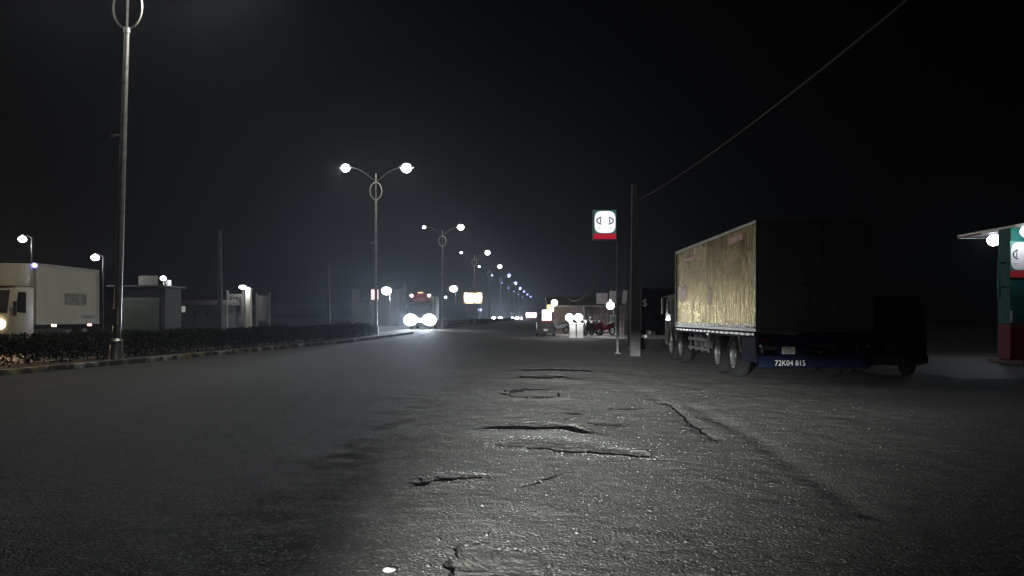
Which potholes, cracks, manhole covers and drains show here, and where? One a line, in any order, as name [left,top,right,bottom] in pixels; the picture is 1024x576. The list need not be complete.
crack [666,404,718,442]
pothole [481,421,595,435]
crack [499,389,642,427]
crack [519,474,562,488]
